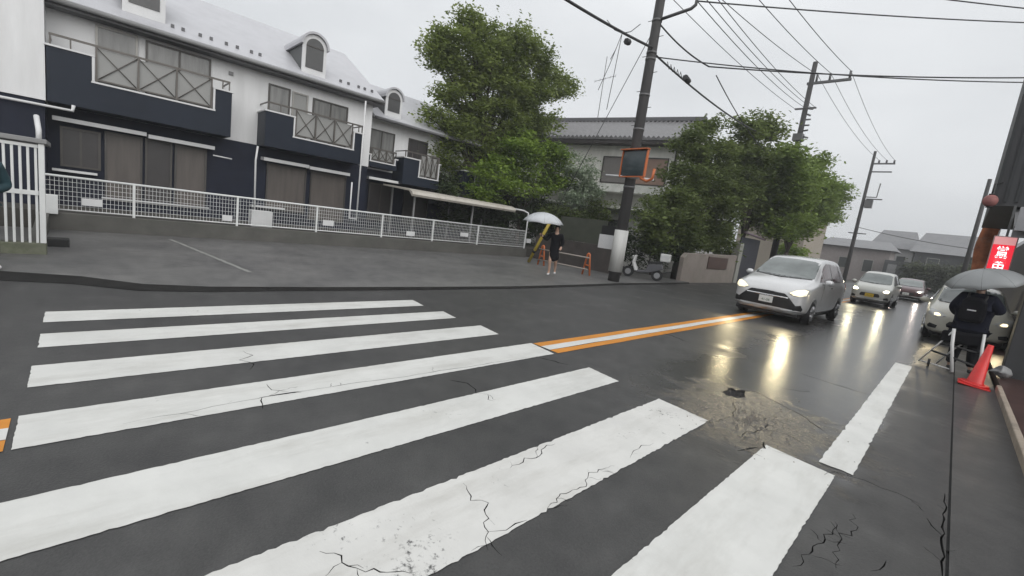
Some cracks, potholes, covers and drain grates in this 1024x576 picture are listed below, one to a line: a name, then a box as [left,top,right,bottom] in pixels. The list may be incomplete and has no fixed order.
pothole [723,388,745,398]
crack [671,335,853,467]
crack [826,471,956,576]
crack [466,487,517,555]
crack [798,515,886,571]
